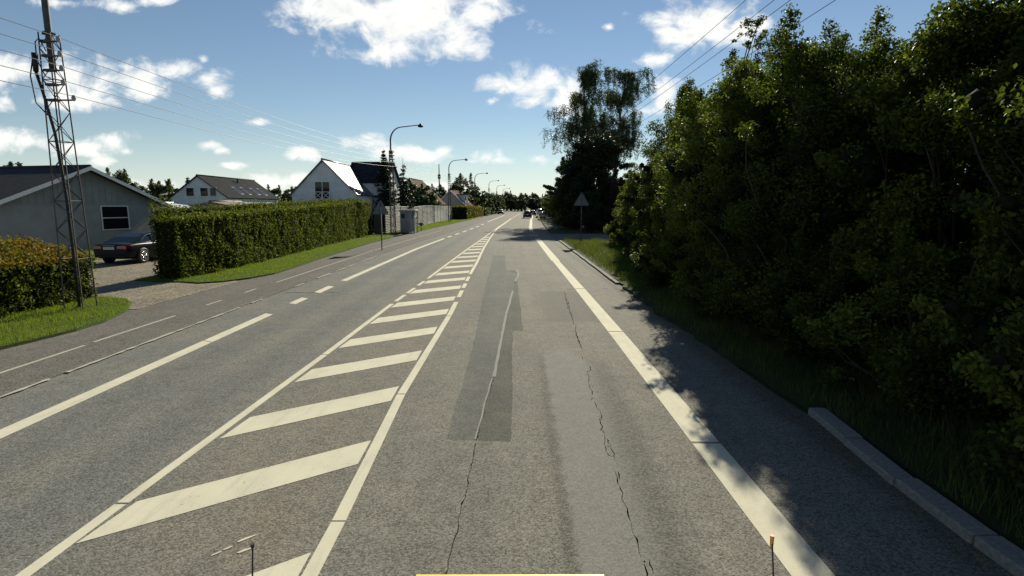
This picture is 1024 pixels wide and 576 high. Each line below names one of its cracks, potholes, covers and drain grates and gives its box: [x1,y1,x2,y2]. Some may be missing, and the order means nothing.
crack [565,289,653,576]
crack [445,269,519,574]
